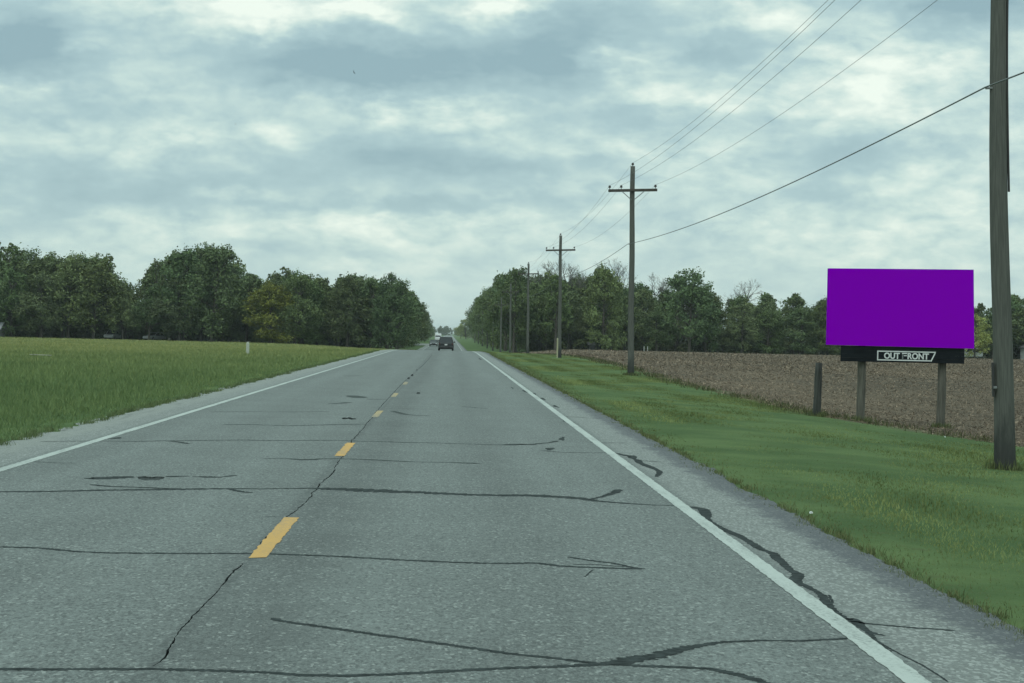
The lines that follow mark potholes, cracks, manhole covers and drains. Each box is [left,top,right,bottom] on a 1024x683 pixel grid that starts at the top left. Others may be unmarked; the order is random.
crack [0,355,645,666]
